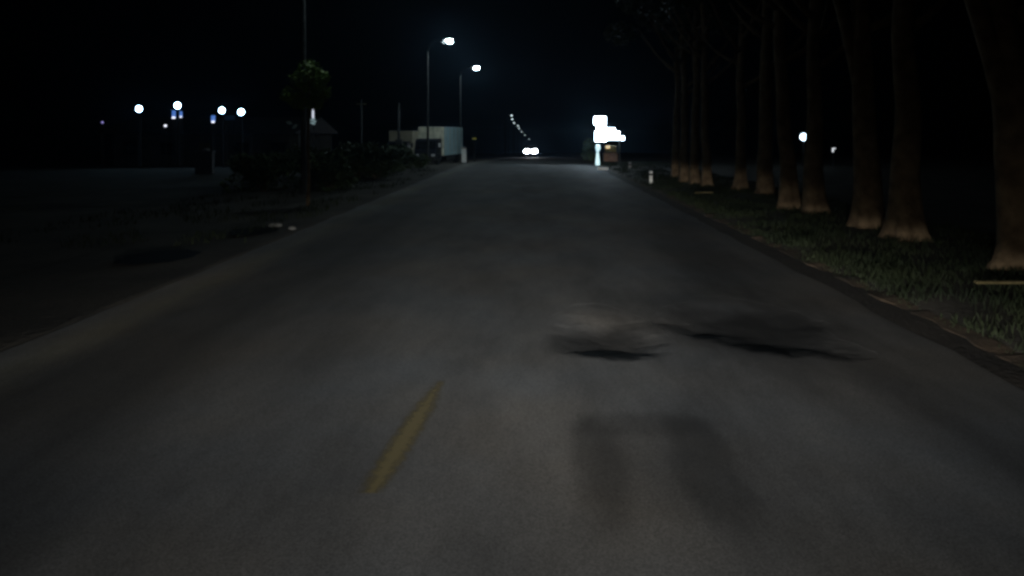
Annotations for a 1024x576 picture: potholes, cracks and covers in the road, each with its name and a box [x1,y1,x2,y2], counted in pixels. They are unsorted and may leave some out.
pothole [645,295,883,362]
pothole [542,303,680,363]
